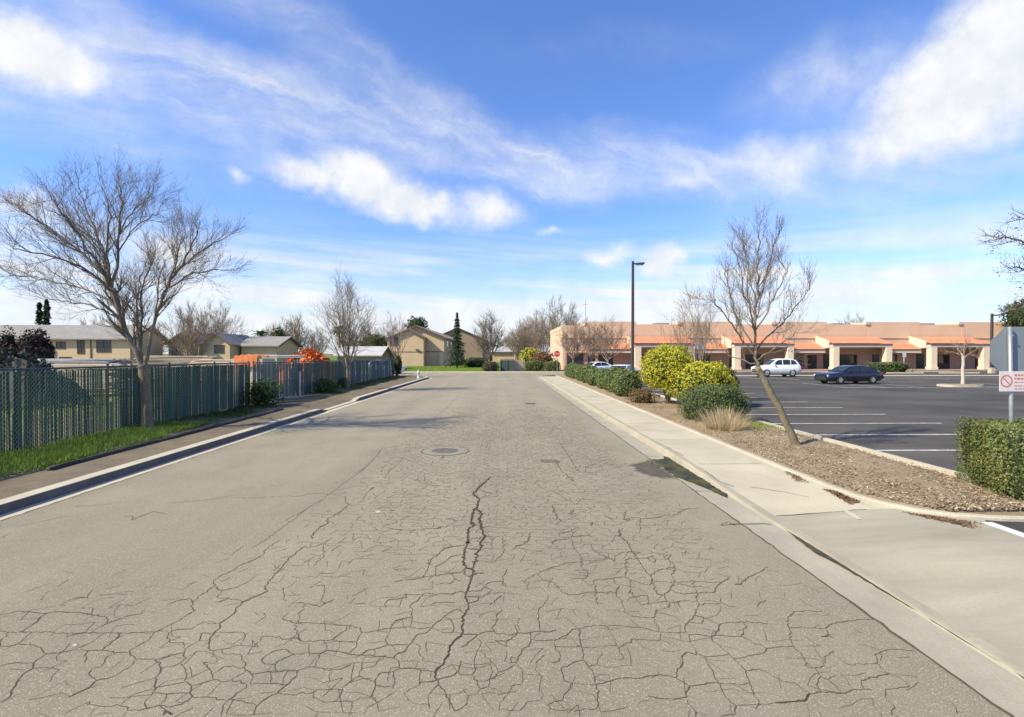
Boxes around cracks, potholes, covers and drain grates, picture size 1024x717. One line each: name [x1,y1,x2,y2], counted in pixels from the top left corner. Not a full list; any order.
manhole cover [421,446,470,456]
crack [0,382,963,717]
